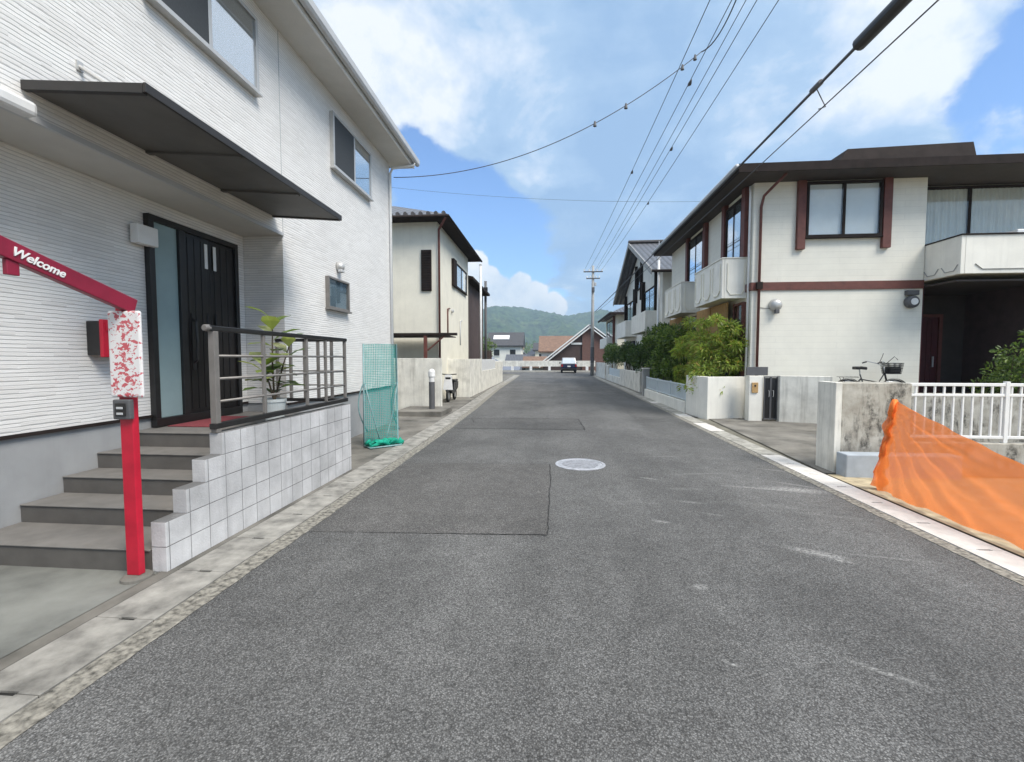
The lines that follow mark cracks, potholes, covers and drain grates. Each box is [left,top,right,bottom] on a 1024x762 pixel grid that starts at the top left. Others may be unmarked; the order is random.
manhole cover [555,458,606,471]
